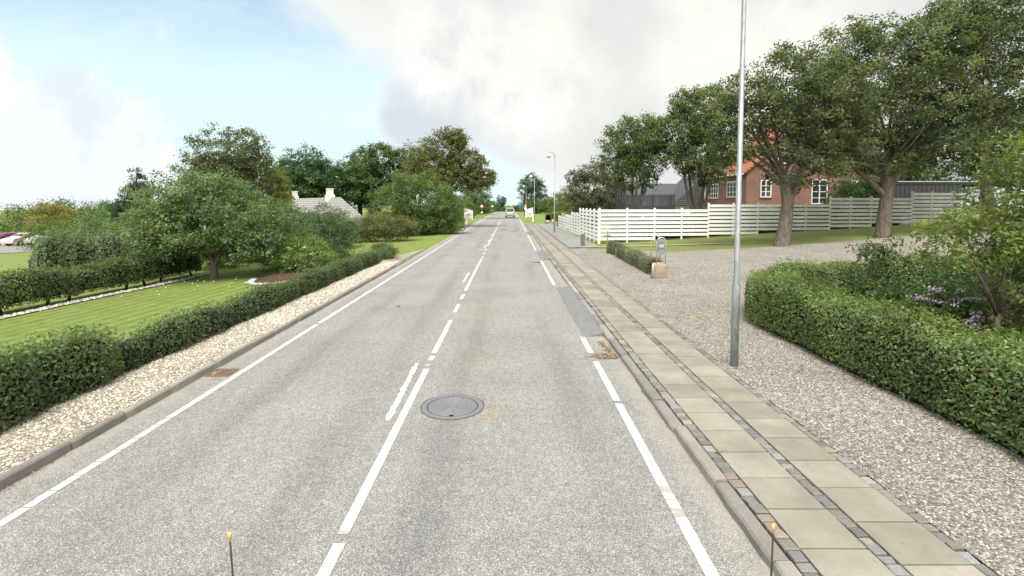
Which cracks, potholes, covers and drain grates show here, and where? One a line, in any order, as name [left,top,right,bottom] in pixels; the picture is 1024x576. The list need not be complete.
manhole cover [420,394,485,420]
drain grate [205,369,239,377]
